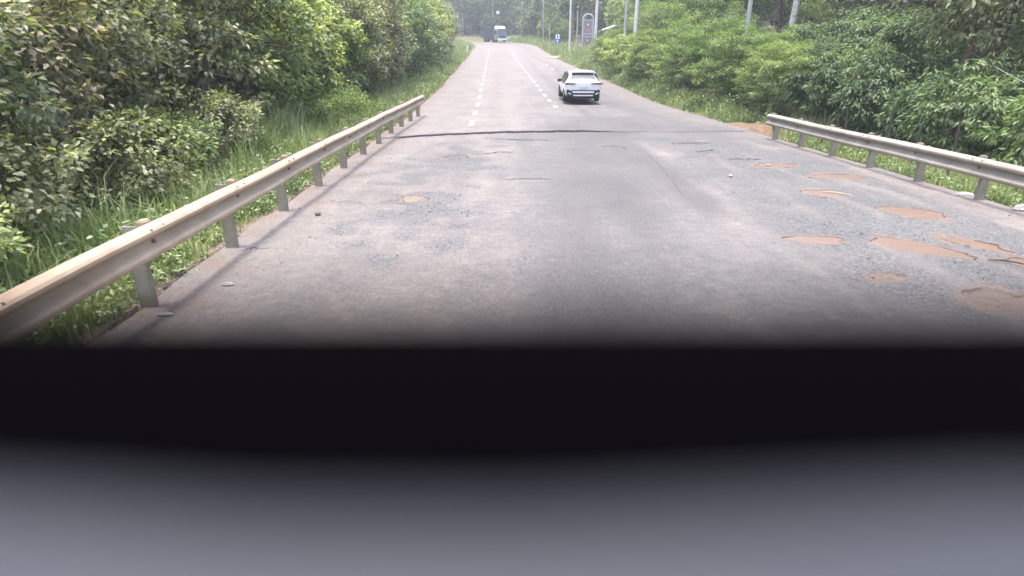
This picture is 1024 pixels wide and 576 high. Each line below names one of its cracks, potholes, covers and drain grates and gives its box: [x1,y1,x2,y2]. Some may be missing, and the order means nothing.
pothole [870,236,978,260]
pothole [800,190,843,198]
pothole [874,206,946,220]
pothole [868,271,907,283]
pothole [961,287,1024,296]
pothole [781,236,843,244]
